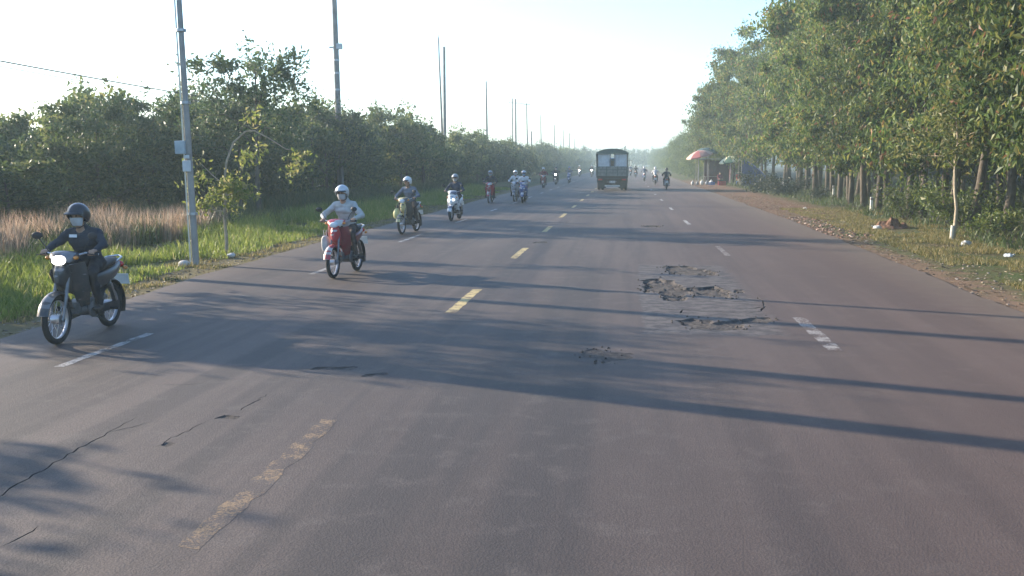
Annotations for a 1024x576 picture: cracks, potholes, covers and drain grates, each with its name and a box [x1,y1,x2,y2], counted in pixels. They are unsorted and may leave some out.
pothole [637,276,739,302]
pothole [579,346,633,364]
pothole [656,265,720,276]
pothole [671,315,778,331]
crack [1,419,149,496]
